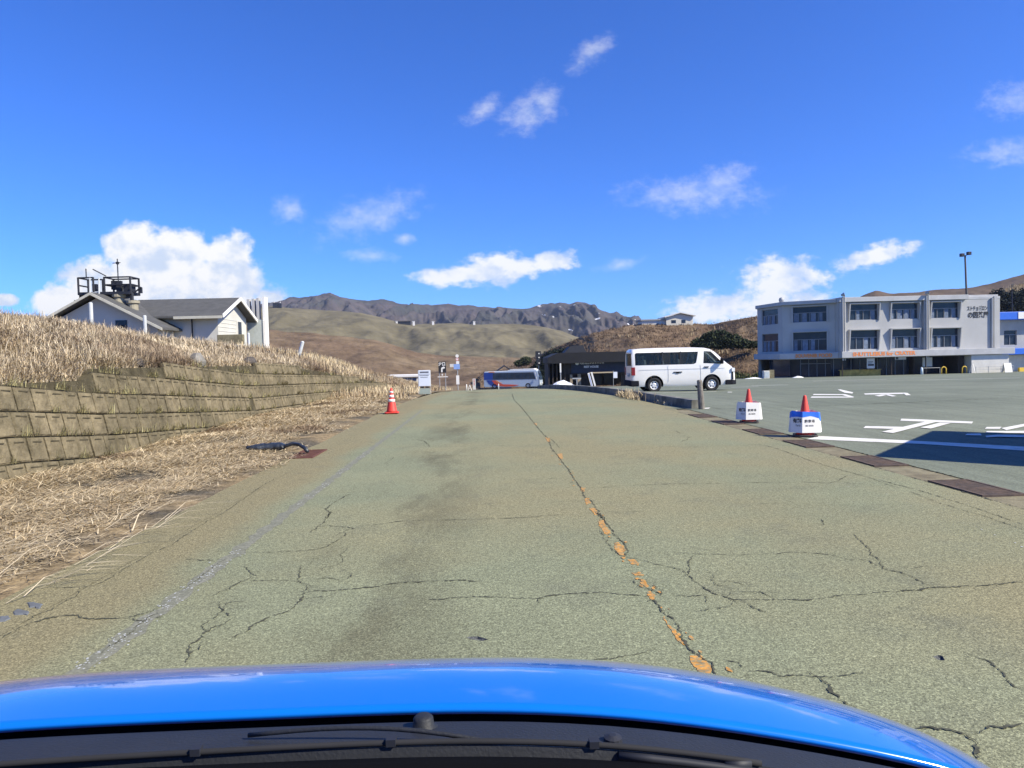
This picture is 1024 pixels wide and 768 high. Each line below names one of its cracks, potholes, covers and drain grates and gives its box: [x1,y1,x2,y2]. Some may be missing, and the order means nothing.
drain grate [287,449,327,459]
crack [2,478,650,662]
crack [965,651,1019,688]
drain grate [840,455,909,467]
drain grate [783,439,835,448]
drain grate [928,479,1024,497]
crack [726,660,1022,759]
crack [674,535,1023,612]
